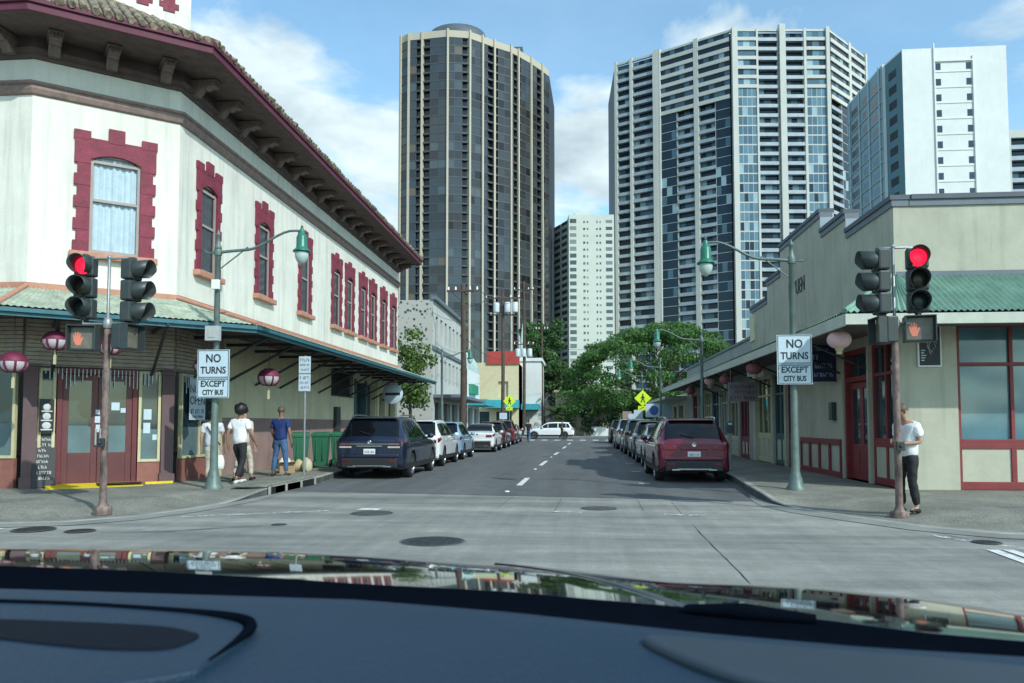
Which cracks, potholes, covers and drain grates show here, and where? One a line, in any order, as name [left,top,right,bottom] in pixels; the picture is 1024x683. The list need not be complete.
manhole cover [399,536,466,547]
